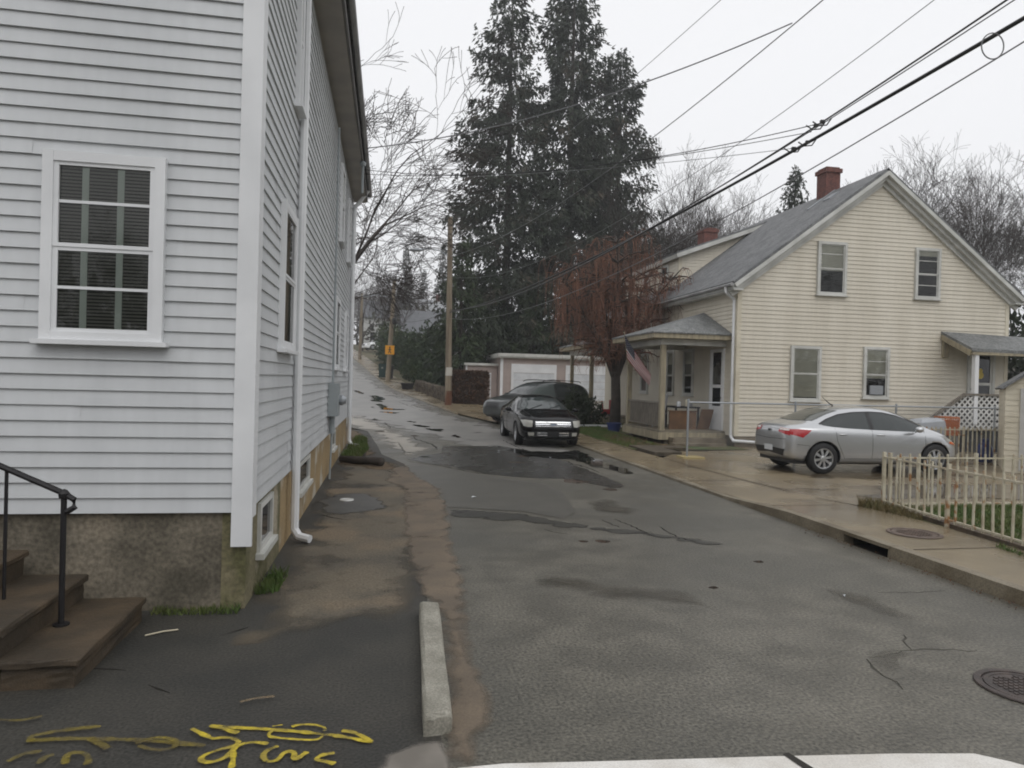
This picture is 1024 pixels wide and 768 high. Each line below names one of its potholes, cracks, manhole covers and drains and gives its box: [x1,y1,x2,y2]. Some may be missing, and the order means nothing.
crack [866,635,971,690]
crack [603,519,697,542]
manhole cover [886,527,944,539]
manhole cover [972,668,1024,703]
drain grate [842,530,900,557]
